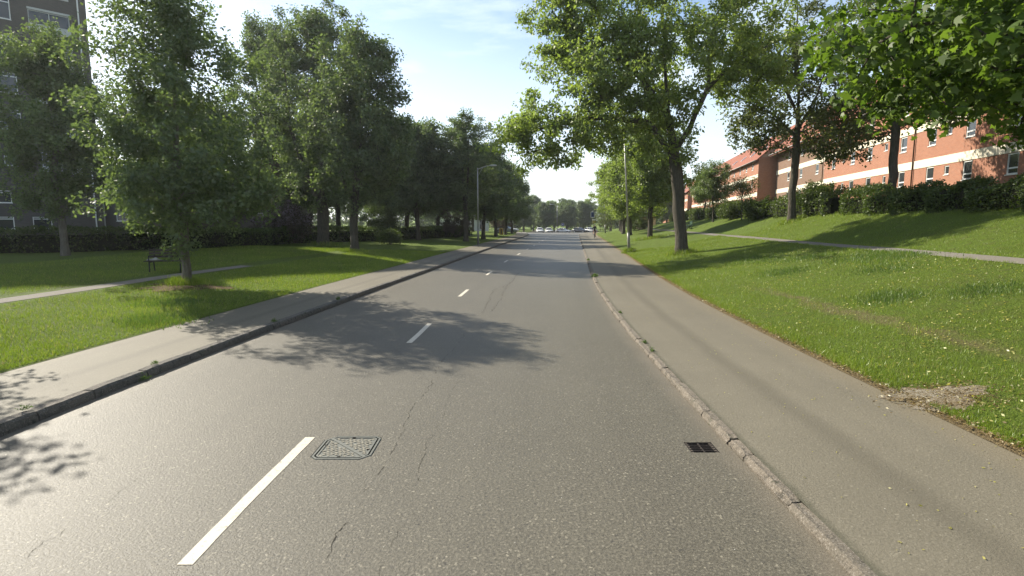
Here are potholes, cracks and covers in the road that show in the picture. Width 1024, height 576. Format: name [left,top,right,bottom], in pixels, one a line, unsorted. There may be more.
manhole cover [311,436,382,460]
drain grate [684,442,720,453]
